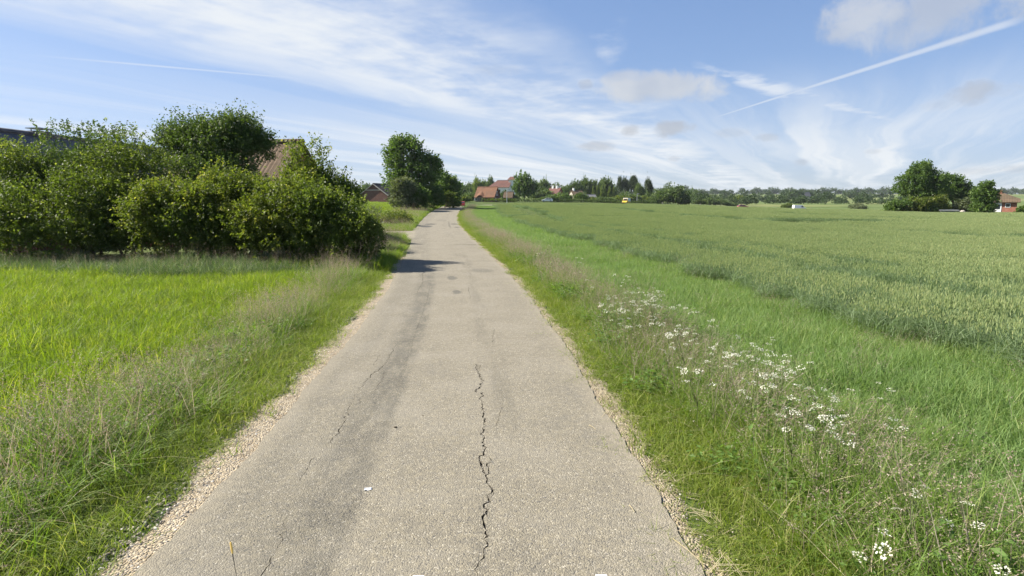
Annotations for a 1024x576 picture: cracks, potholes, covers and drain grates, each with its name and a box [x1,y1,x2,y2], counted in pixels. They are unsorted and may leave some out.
crack [466,364,502,575]
crack [300,348,394,479]
